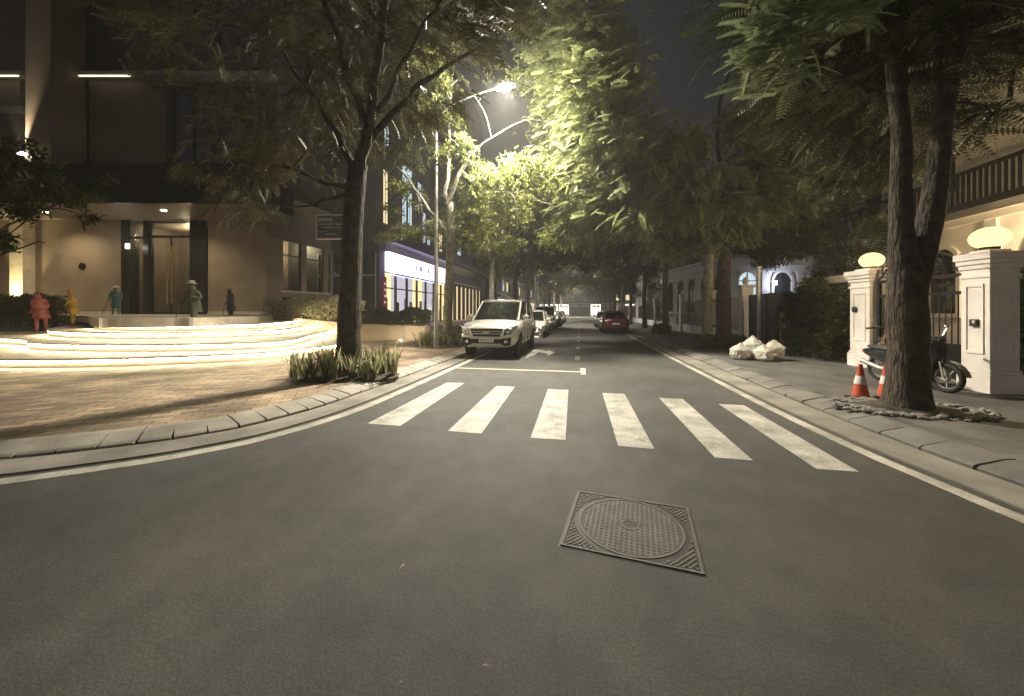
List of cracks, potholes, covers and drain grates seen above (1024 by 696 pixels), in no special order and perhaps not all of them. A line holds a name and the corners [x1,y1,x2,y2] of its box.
manhole cover [558,490,708,578]
